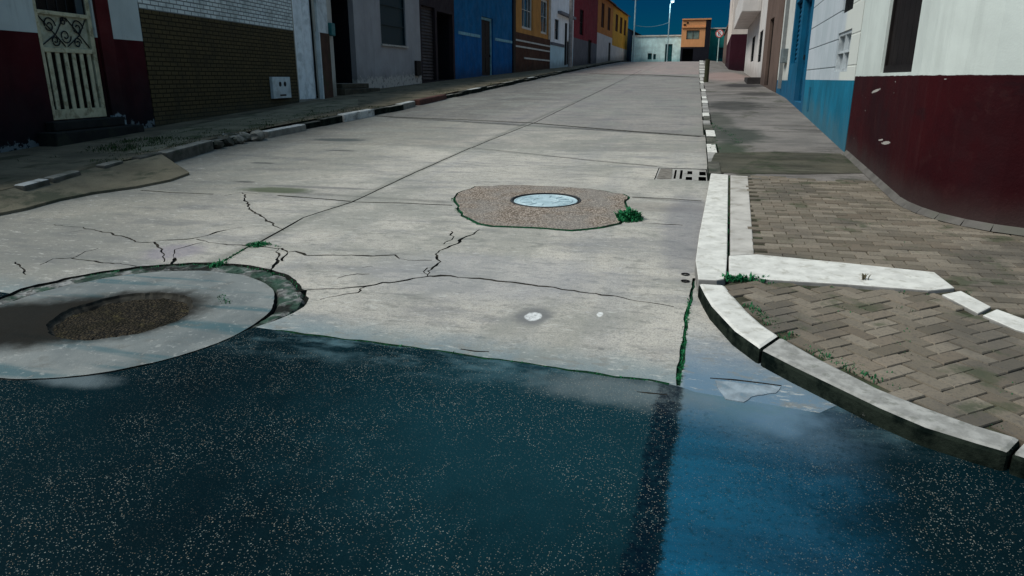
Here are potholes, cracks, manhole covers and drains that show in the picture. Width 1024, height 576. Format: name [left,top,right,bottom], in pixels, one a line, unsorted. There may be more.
crack [230,192,281,229]
pothole [46,293,193,341]
crack [0,224,674,381]
manhole cover [510,193,581,208]
drain grate [654,168,707,181]
